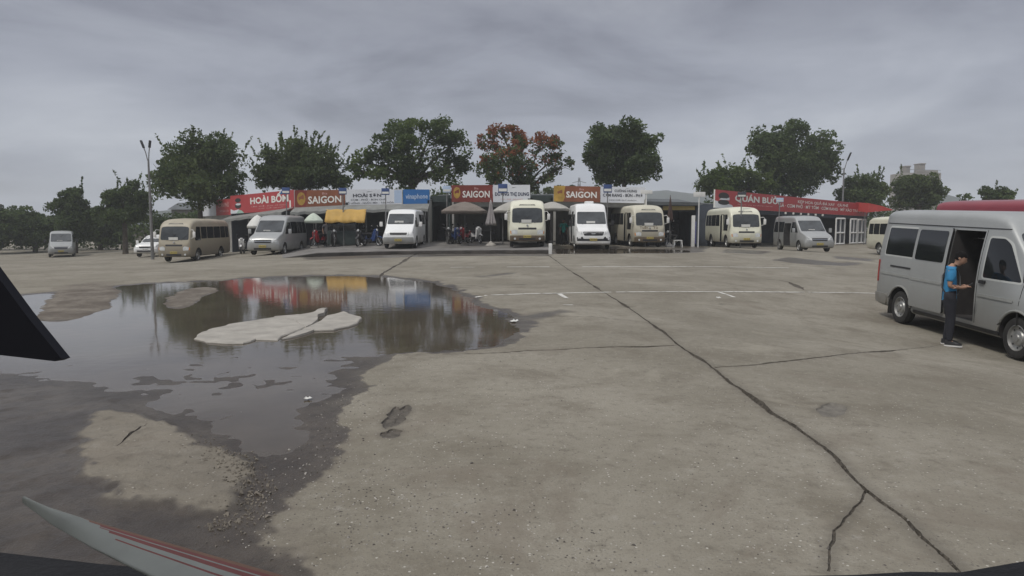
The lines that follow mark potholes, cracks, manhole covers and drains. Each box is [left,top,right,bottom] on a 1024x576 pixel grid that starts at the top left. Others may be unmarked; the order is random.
pothole [381,405,412,429]
crack [414,255,961,572]
pothole [380,429,402,438]
crack [117,426,142,446]
